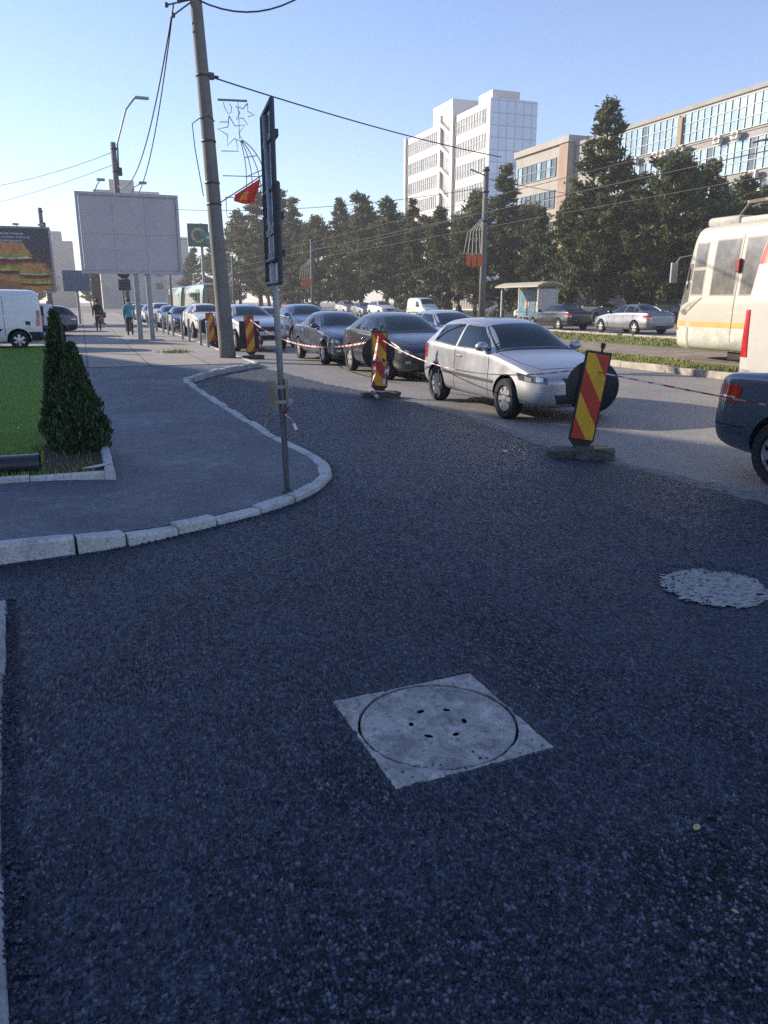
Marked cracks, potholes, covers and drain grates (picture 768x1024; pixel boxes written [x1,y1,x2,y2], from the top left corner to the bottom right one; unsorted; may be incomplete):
manhole cover [333,673,553,789]
